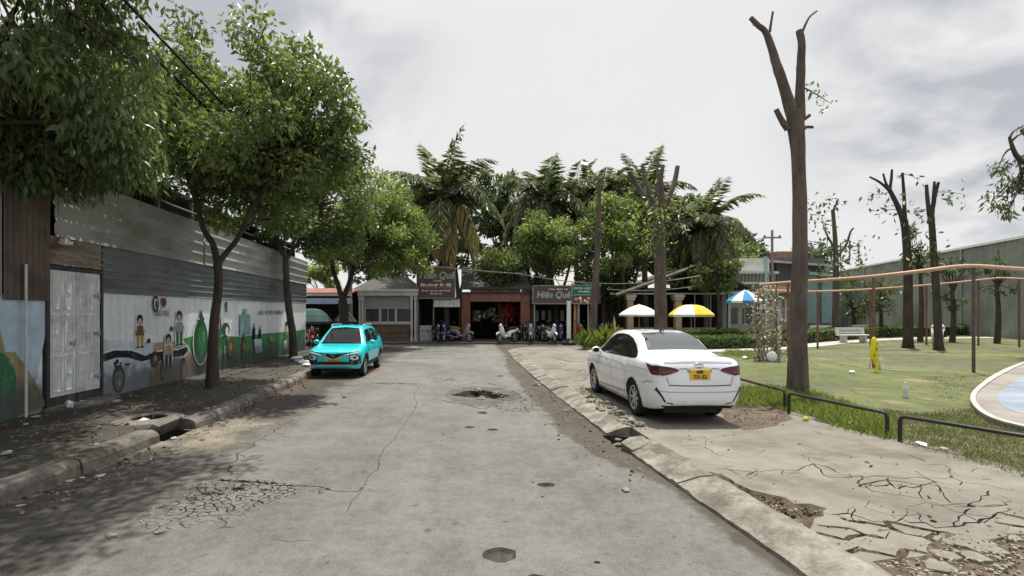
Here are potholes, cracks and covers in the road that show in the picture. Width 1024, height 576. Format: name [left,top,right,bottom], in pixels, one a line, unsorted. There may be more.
pothole [452,390,510,399]
pothole [482,547,516,563]
crack [691,434,1024,558]
drain grate [159,429,192,441]
crack [136,378,542,533]
